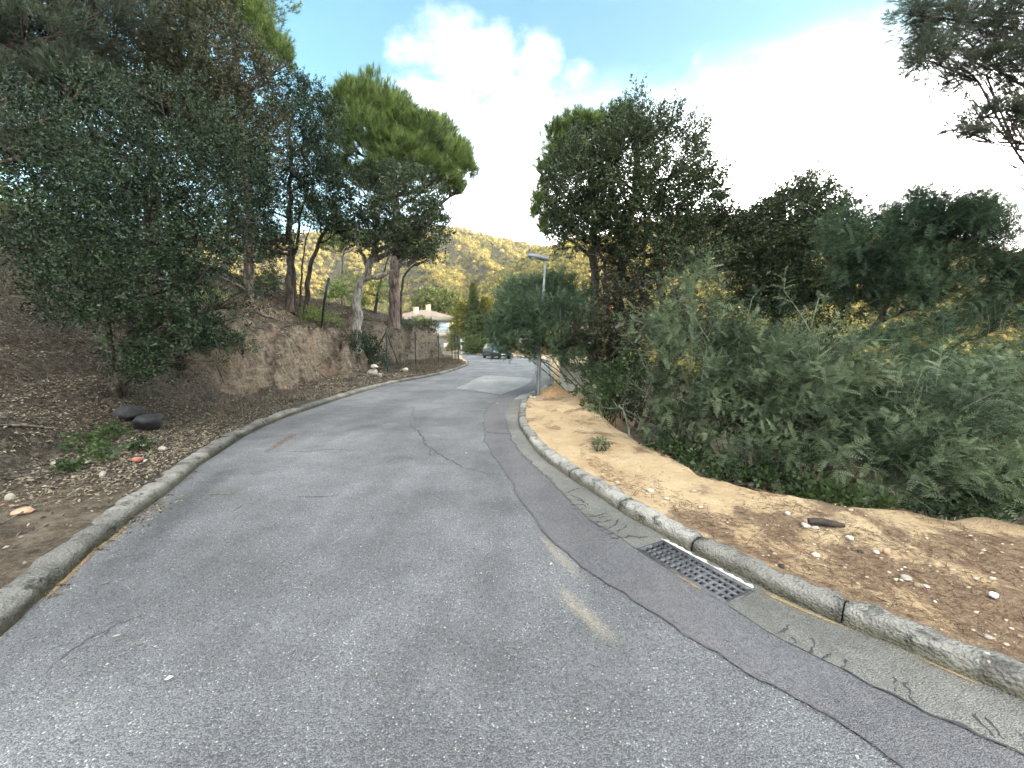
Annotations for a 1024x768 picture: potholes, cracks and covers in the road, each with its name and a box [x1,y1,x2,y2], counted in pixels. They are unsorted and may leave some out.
crack [893,677,917,704]
crack [53,615,142,664]
crack [385,406,491,475]
crack [973,713,1024,741]
crack [603,519,648,539]
drain grate [637,540,756,606]
